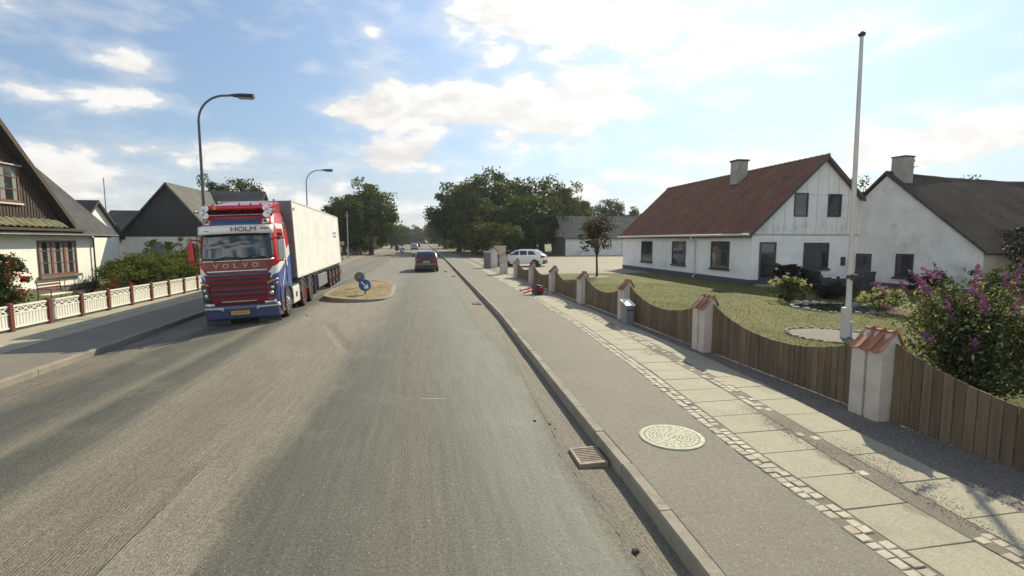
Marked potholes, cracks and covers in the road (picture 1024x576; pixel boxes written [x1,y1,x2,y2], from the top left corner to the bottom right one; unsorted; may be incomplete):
manhole cover [639,425,705,451]
drain grate [569,446,608,468]
